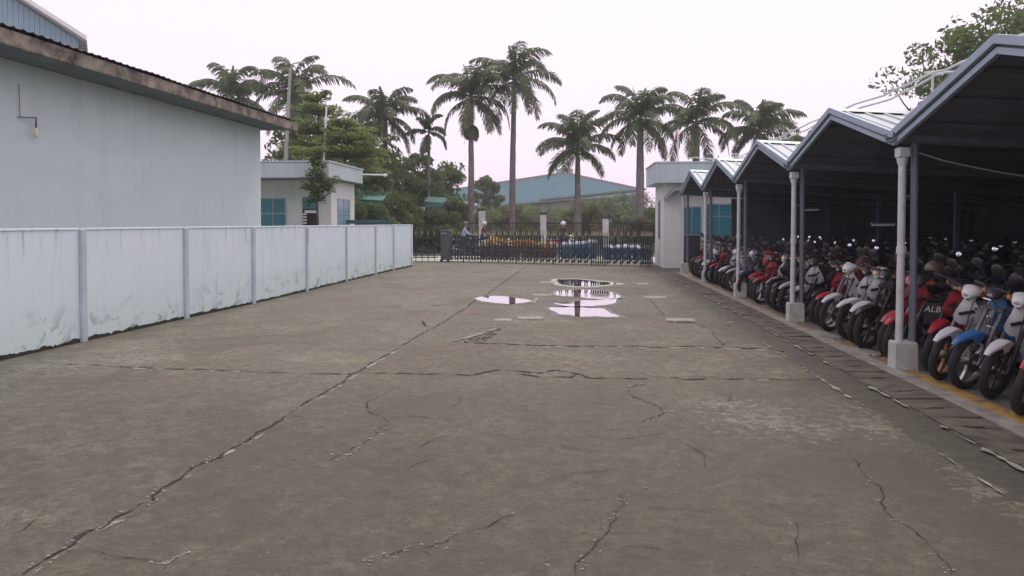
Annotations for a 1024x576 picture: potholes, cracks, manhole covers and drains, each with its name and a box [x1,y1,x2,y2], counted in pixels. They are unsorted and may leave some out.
crack [494,325,786,352]
crack [852,457,955,574]
crack [1,300,476,575]
crack [318,381,790,573]
